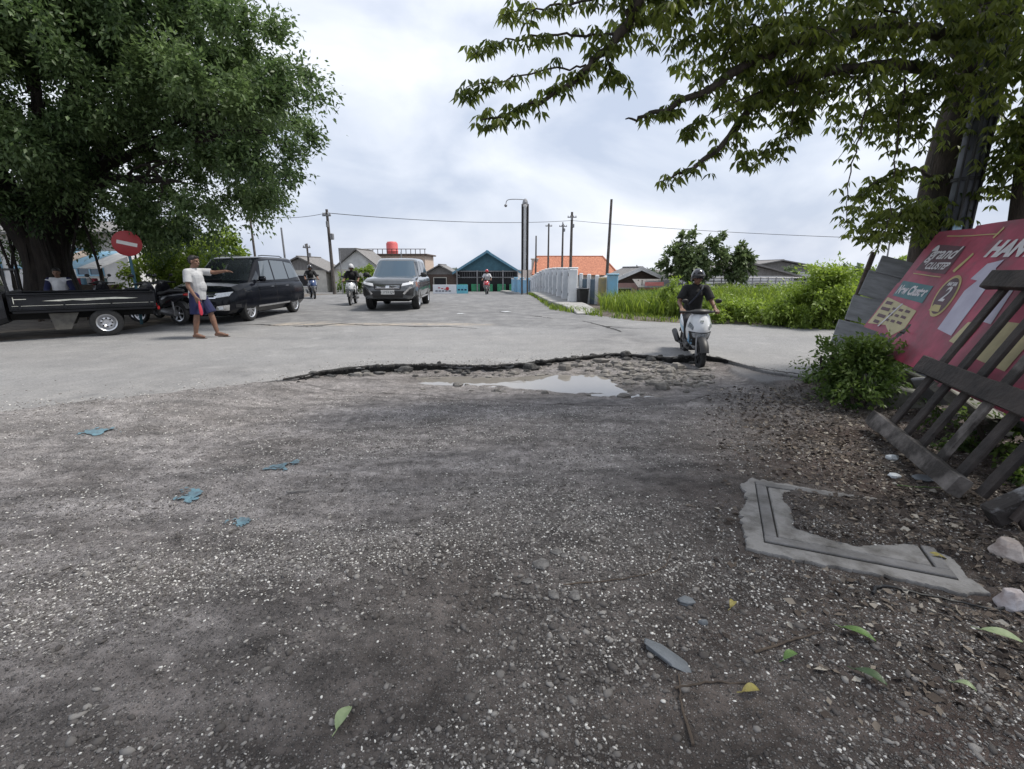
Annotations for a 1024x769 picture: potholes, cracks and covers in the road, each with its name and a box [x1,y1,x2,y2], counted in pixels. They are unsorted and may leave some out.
pothole [283,350,729,406]
